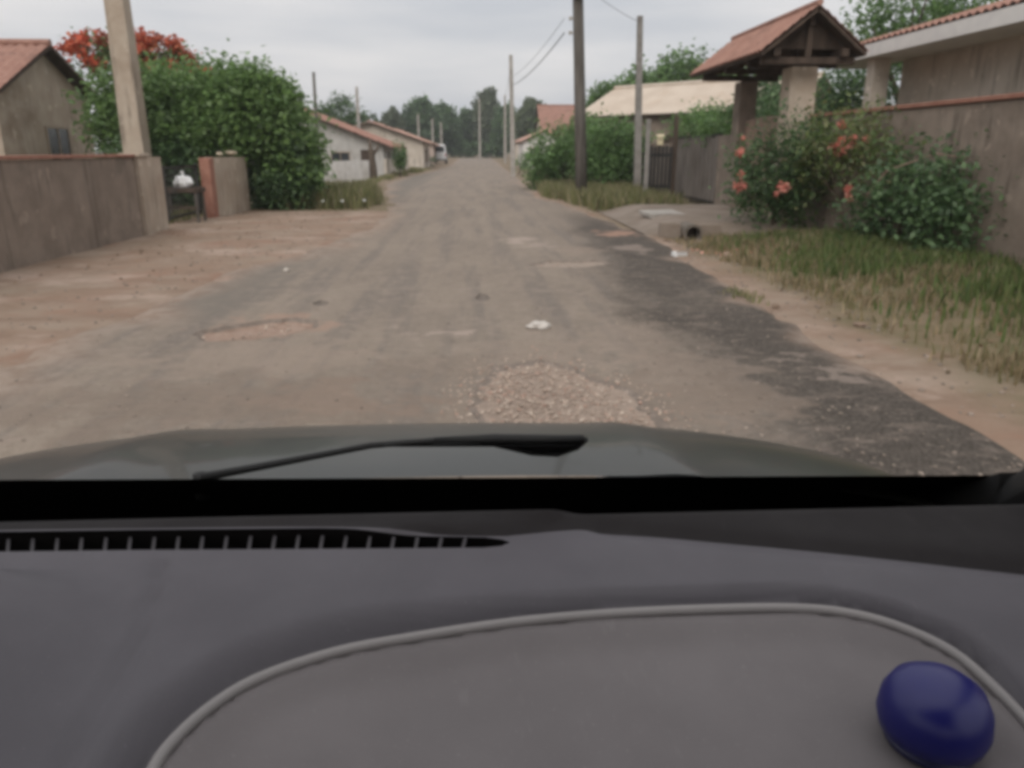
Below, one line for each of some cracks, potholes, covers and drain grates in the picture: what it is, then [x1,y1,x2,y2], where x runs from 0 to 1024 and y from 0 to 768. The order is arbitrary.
pothole [440,346,711,433]
pothole [193,317,318,342]
